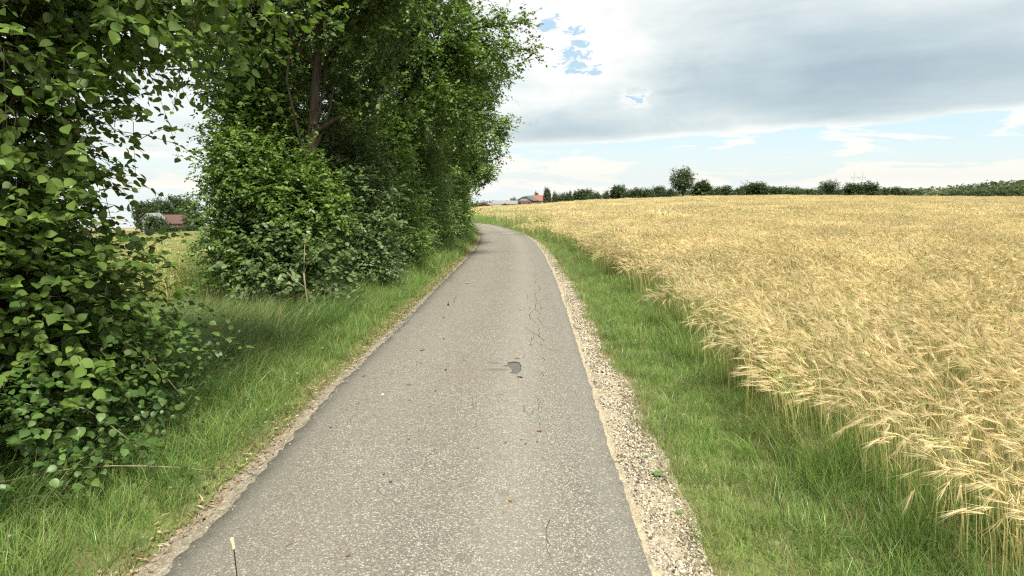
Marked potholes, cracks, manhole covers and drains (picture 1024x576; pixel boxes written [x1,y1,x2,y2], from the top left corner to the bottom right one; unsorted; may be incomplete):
crack [525,266,554,359]
pothole [505,361,521,374]
